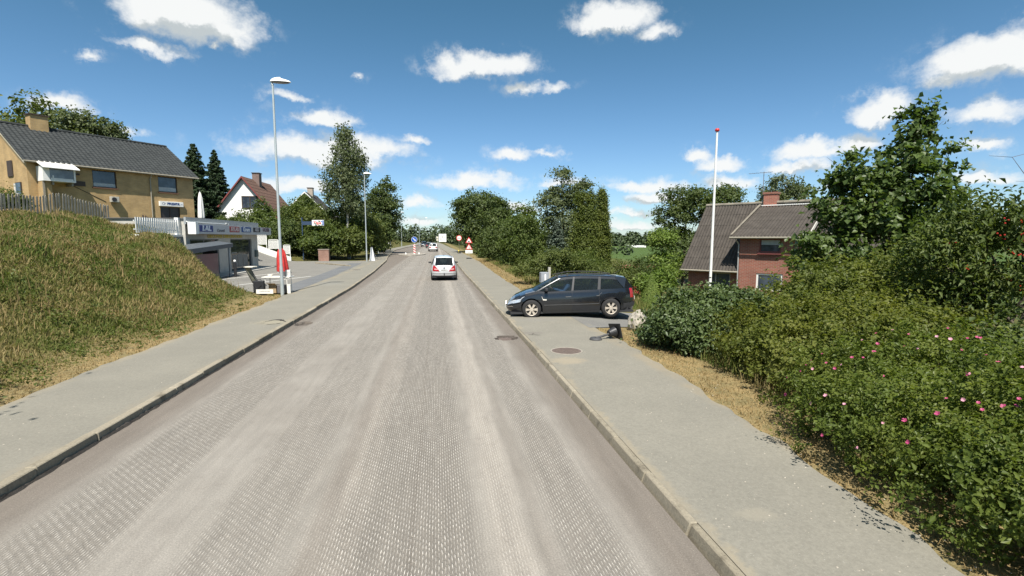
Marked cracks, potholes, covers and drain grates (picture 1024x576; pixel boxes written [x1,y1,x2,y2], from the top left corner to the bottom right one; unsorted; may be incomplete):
manhole cover [550,347,583,355]
